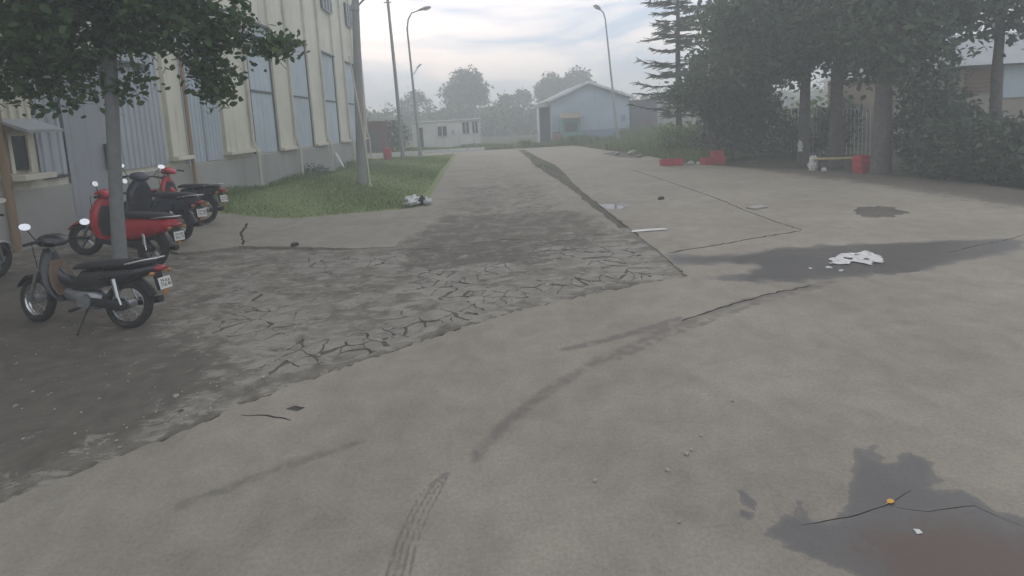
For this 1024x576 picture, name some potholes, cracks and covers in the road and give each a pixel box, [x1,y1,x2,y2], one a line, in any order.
crack [177,248,656,414]
crack [682,286,809,321]
crack [804,490,1023,527]
